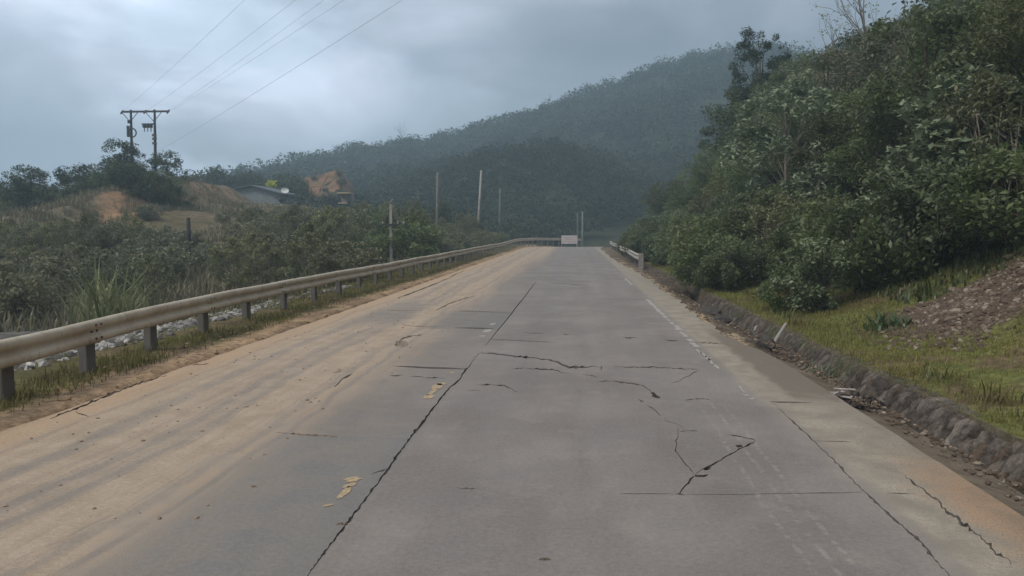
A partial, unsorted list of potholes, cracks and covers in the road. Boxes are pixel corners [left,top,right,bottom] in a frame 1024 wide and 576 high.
crack [469,353,755,493]
crack [399,271,473,310]
crack [51,376,164,419]
crack [905,476,1011,563]
